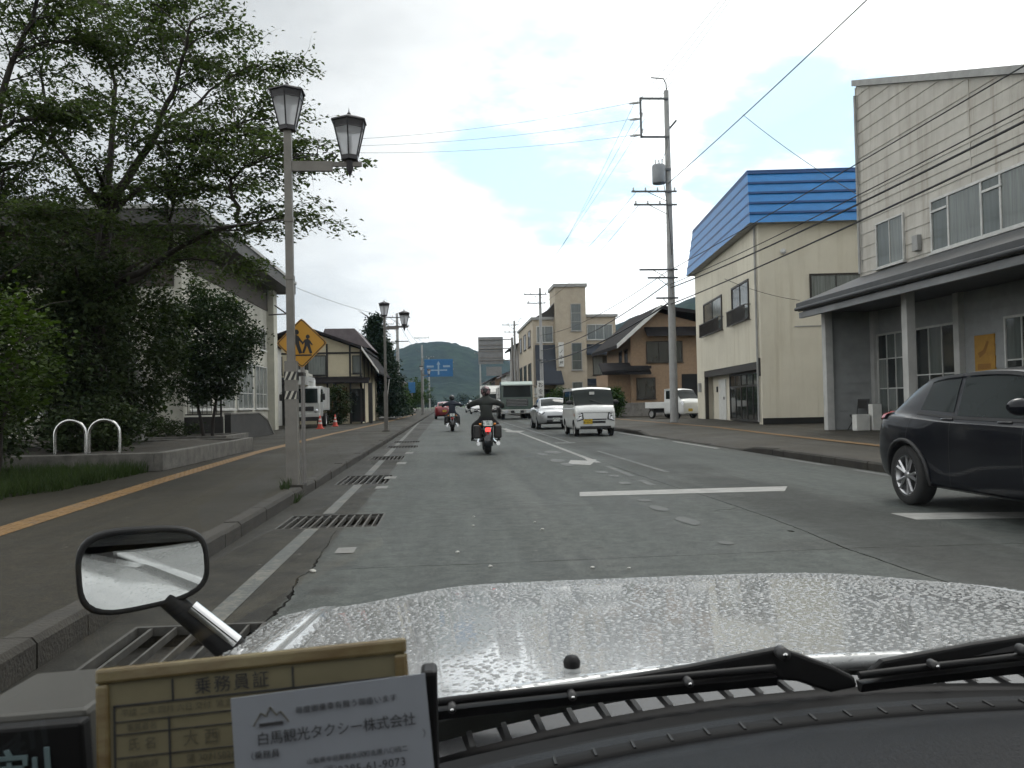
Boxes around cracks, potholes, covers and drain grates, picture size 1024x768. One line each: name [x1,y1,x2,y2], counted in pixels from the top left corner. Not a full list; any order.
drain grate [274,513,386,532]
crack [254,532,335,632]
drain grate [335,475,393,485]
drain grate [76,622,266,670]
